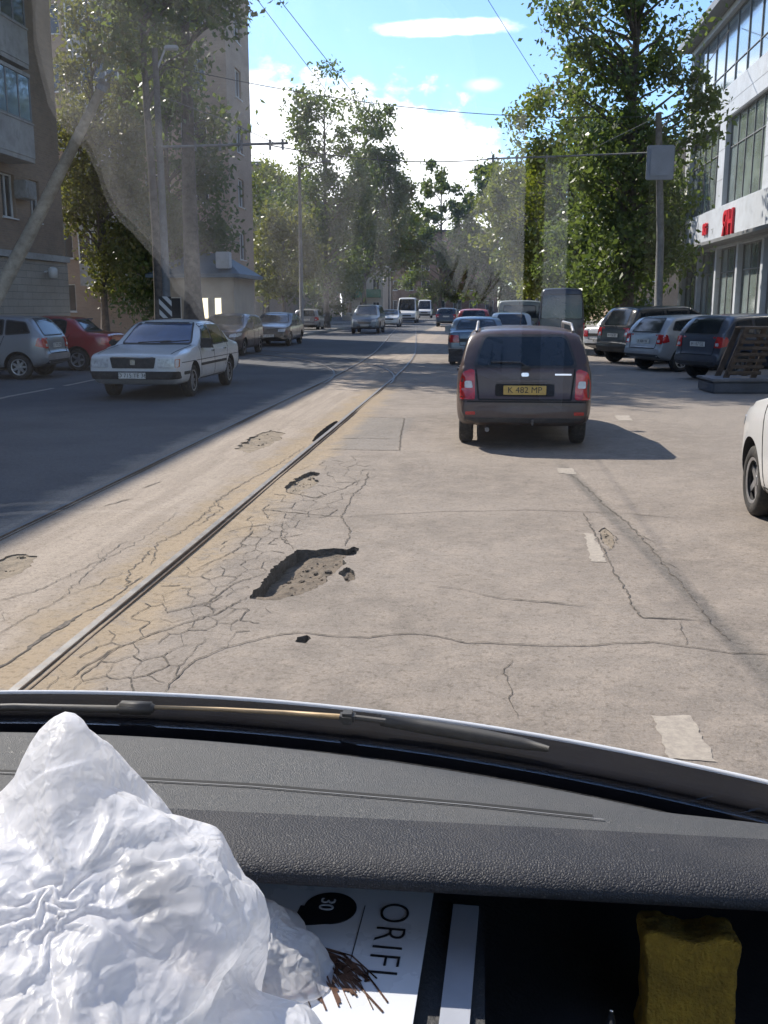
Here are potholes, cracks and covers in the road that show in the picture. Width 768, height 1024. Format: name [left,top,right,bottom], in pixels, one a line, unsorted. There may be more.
pothole [0,554,37,580]
pothole [234,430,286,453]
crack [0,417,768,717]
pothole [312,421,338,442]
pothole [284,471,320,493]
pothole [250,547,359,600]
